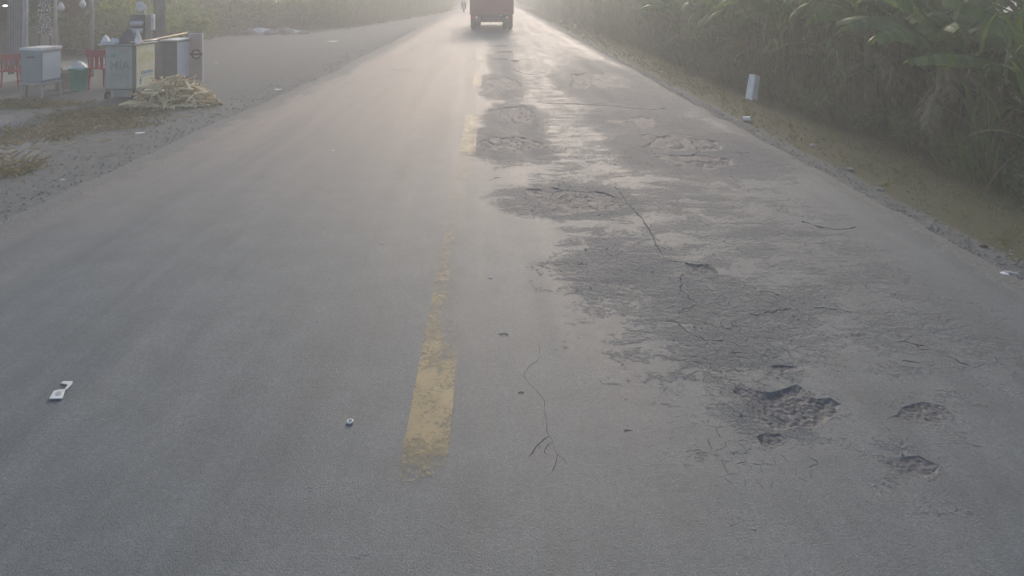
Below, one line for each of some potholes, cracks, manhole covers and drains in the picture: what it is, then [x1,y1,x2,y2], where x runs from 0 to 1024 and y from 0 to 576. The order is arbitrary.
pothole [885,455,939,478]
pothole [733,383,841,430]
pothole [685,263,718,274]
crack [524,346,567,472]
crack [898,341,969,366]
crack [615,187,800,381]
pothole [888,402,955,425]
crack [702,391,818,490]
pothole [756,433,786,450]
